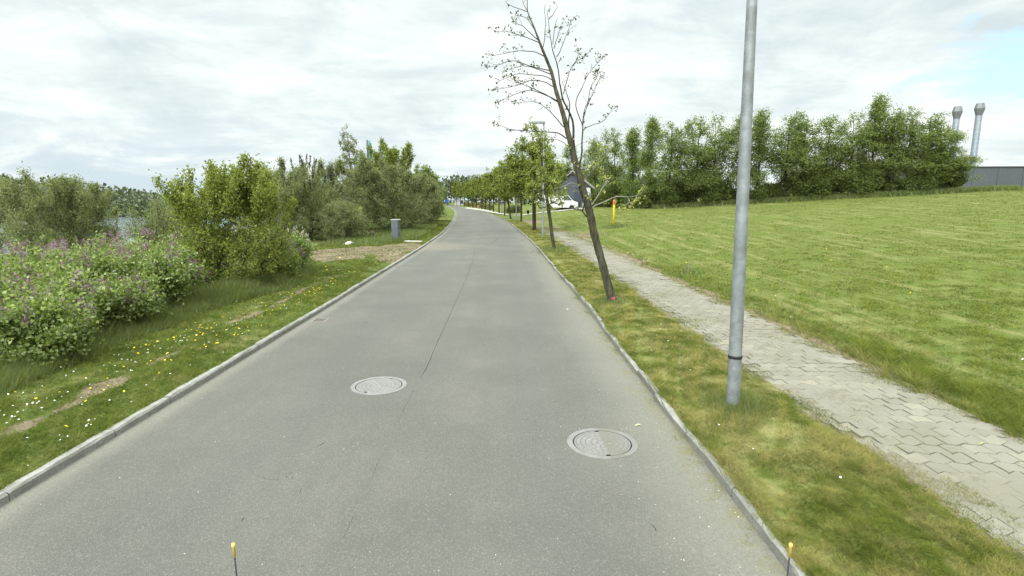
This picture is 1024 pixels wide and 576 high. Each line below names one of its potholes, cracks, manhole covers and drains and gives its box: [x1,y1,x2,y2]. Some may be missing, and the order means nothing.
manhole cover [567,428,638,459]
crack [344,256,474,536]
manhole cover [350,376,407,395]
